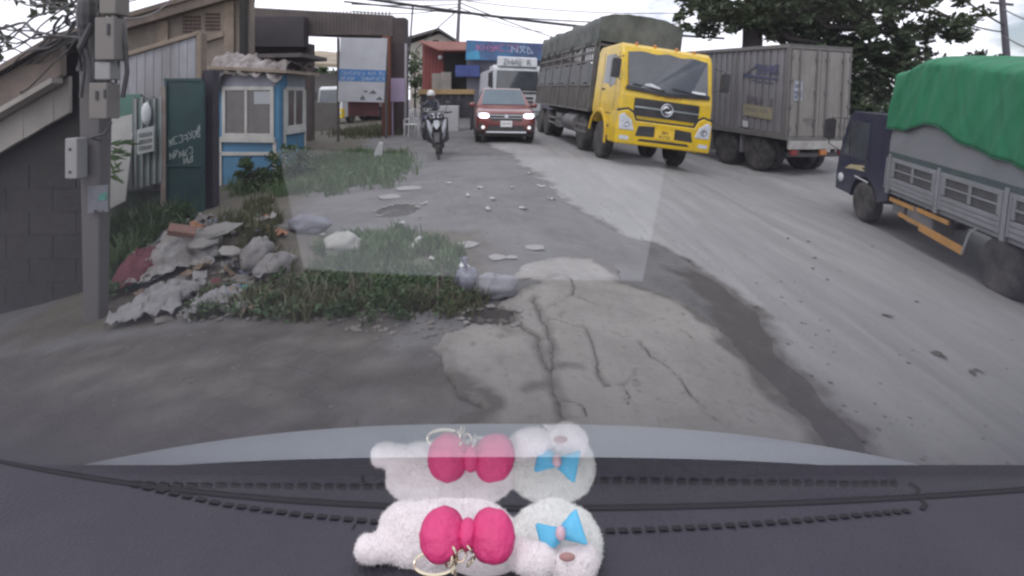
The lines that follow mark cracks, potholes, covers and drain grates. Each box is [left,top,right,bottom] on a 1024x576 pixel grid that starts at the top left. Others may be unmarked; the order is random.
crack [519,275,717,424]
pothole [459,304,532,328]
pothole [372,203,421,217]
